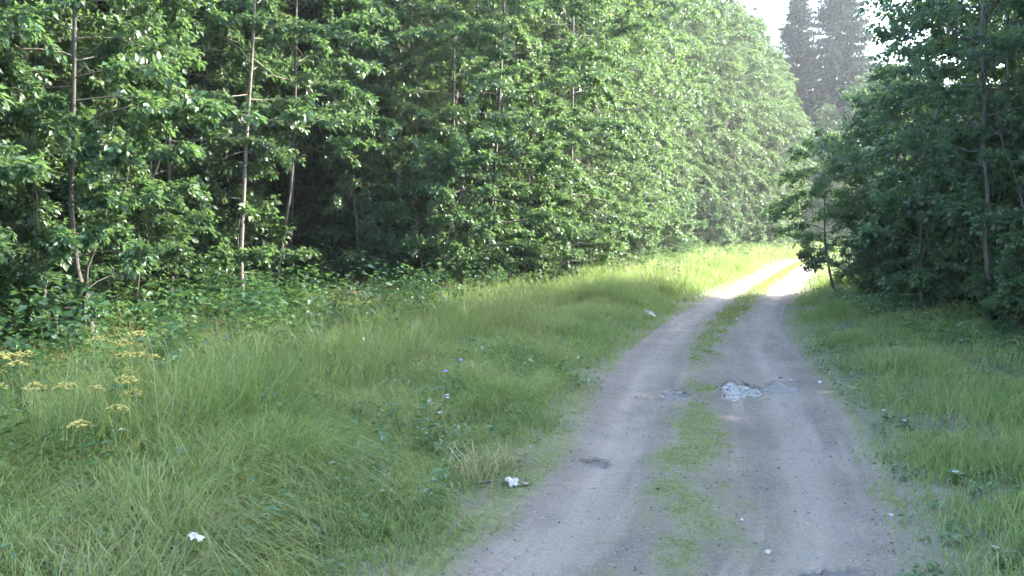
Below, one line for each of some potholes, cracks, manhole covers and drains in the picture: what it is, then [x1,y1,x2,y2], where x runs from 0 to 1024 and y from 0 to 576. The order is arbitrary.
pothole [647,388,698,402]
pothole [763,379,804,397]
pothole [716,378,771,401]
pothole [574,456,612,470]
